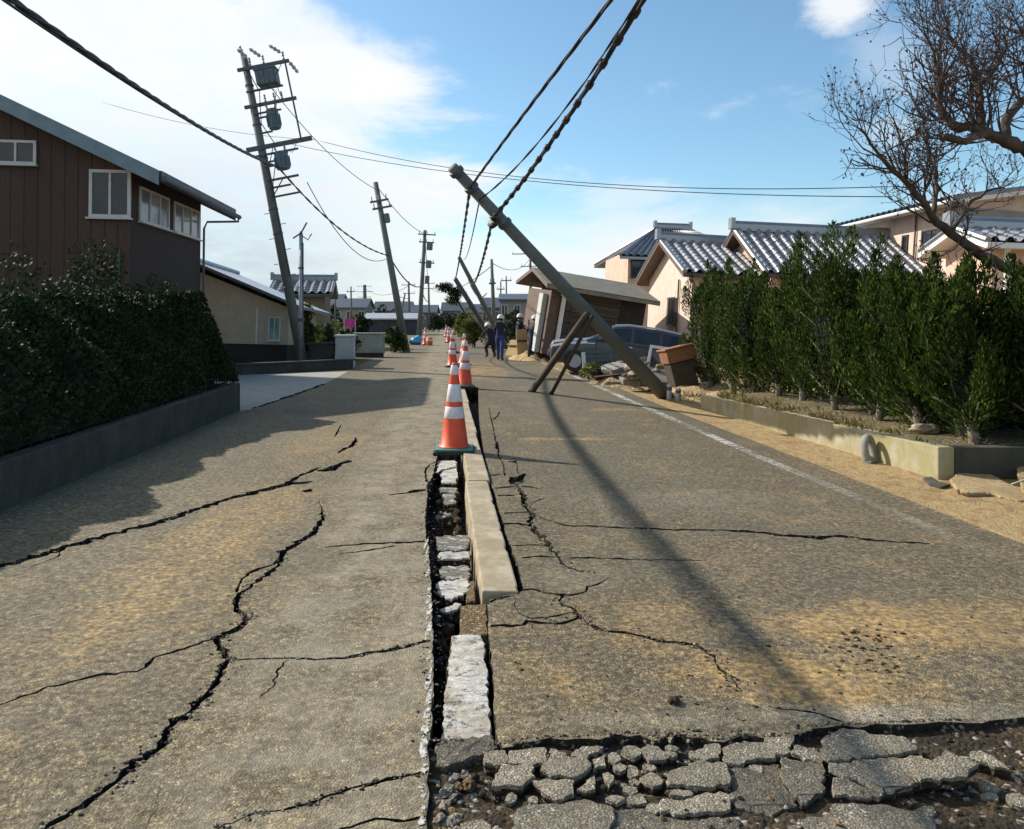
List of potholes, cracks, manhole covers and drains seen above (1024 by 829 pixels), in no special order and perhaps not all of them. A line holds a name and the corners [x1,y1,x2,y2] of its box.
crack [0,387,930,829]
pothole [426,717,1024,829]
